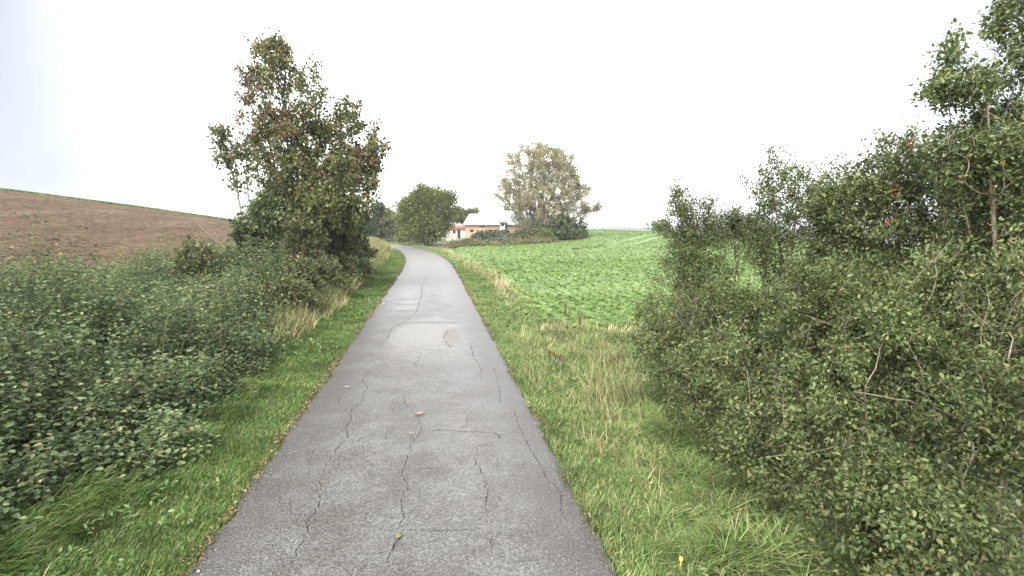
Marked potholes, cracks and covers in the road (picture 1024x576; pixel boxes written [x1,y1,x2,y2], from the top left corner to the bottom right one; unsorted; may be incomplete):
crack [386,346,565,568]
crack [280,371,369,567]
